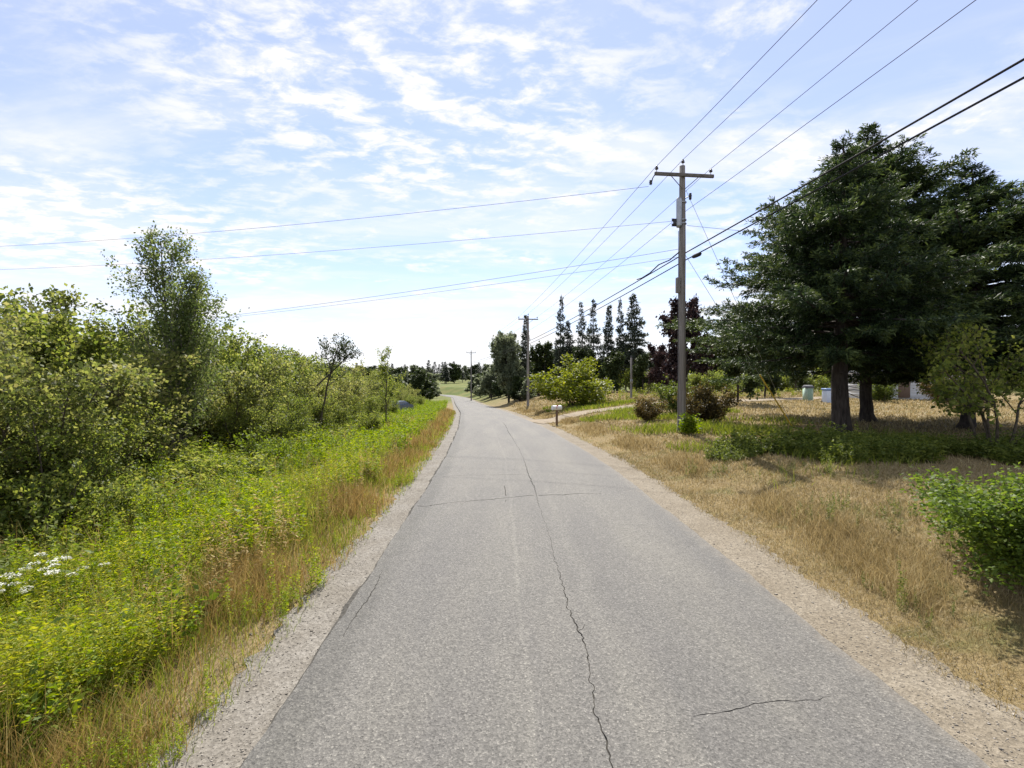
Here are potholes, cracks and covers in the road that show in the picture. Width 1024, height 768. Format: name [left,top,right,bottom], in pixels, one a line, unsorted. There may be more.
crack [430,424,613,768]
crack [693,696,830,717]
